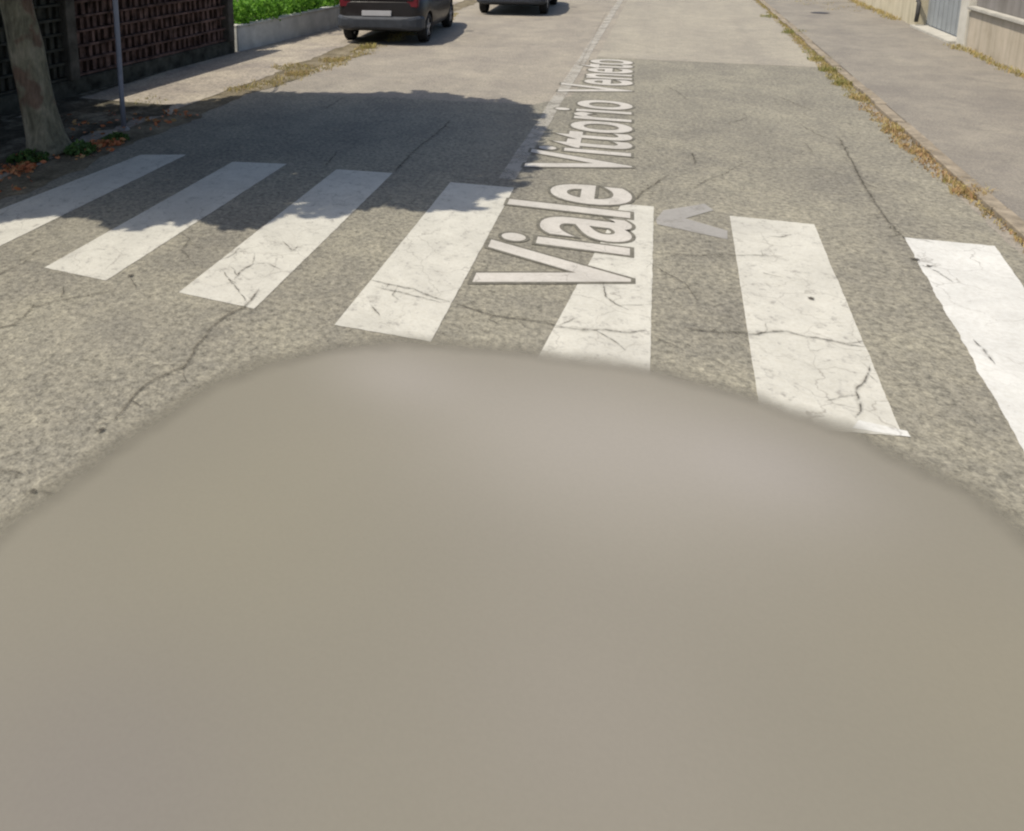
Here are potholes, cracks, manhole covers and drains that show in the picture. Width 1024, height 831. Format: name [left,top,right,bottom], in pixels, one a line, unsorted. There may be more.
crack [803,126,930,242]
crack [100,248,280,424]
